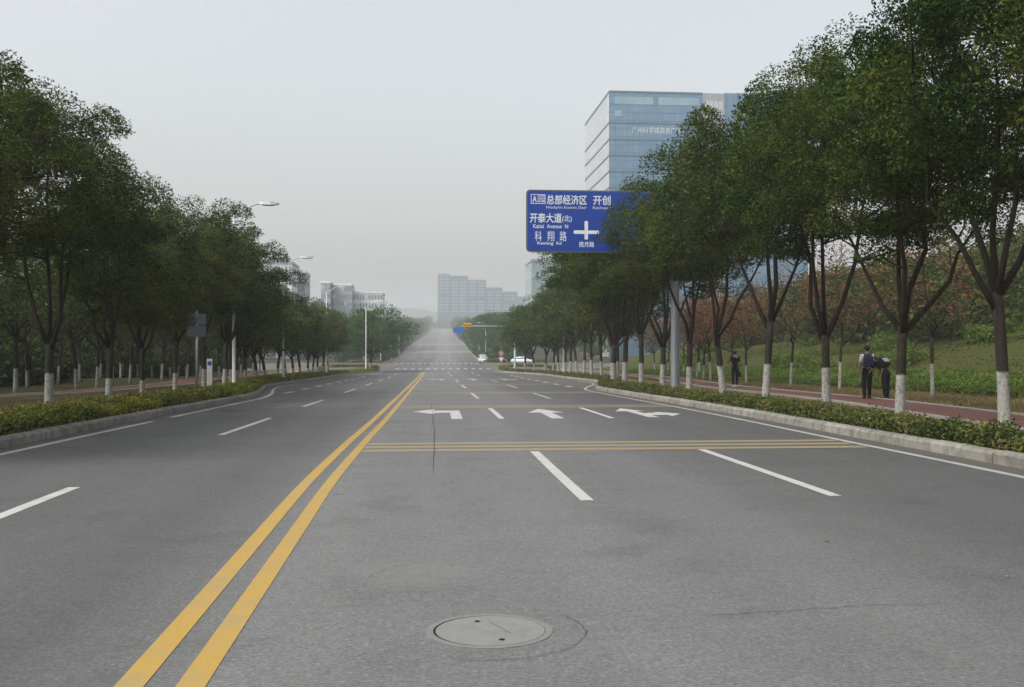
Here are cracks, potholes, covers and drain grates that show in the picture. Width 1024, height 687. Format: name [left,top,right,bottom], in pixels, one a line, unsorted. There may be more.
manhole cover [426,614,553,649]
crack [712,604,945,615]
